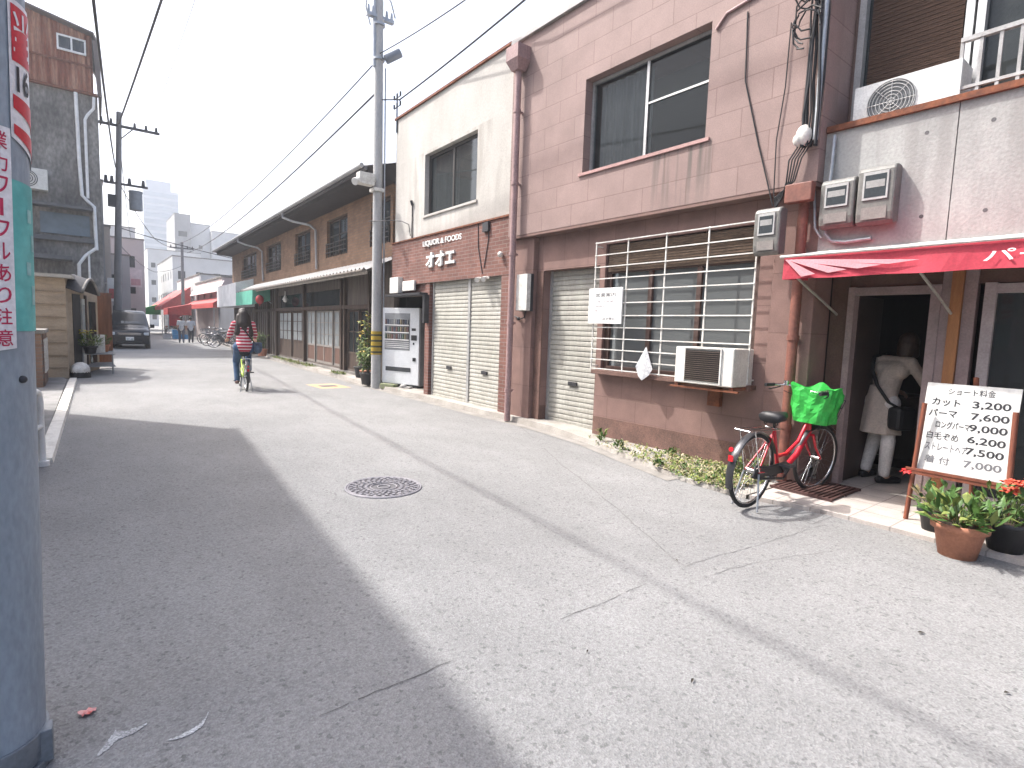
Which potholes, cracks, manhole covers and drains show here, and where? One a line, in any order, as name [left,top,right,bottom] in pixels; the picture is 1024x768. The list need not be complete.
manhole cover [344,476,422,499]
crack [319,584,644,716]
crack [684,525,843,578]
